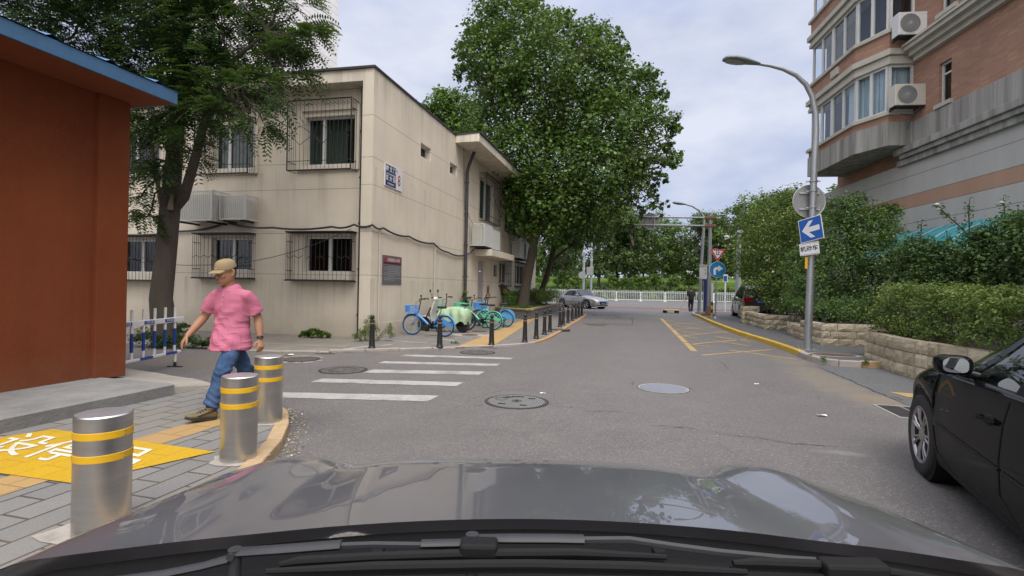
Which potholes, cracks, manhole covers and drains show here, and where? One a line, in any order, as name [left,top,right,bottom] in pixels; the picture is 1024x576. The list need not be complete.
manhole cover [484,394,549,409]
drain grate [872,404,911,418]
manhole cover [637,383,690,394]
manhole cover [318,366,368,374]
